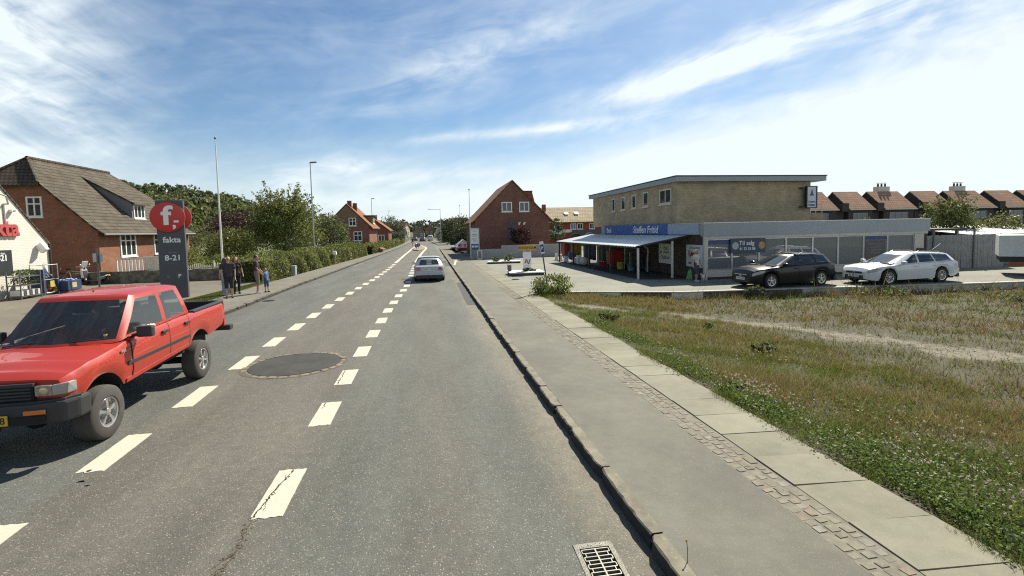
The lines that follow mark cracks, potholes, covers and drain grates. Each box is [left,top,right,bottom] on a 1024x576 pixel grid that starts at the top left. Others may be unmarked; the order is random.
manhole cover [238,352,348,379]
drain grate [573,540,630,576]
crack [209,470,294,576]
